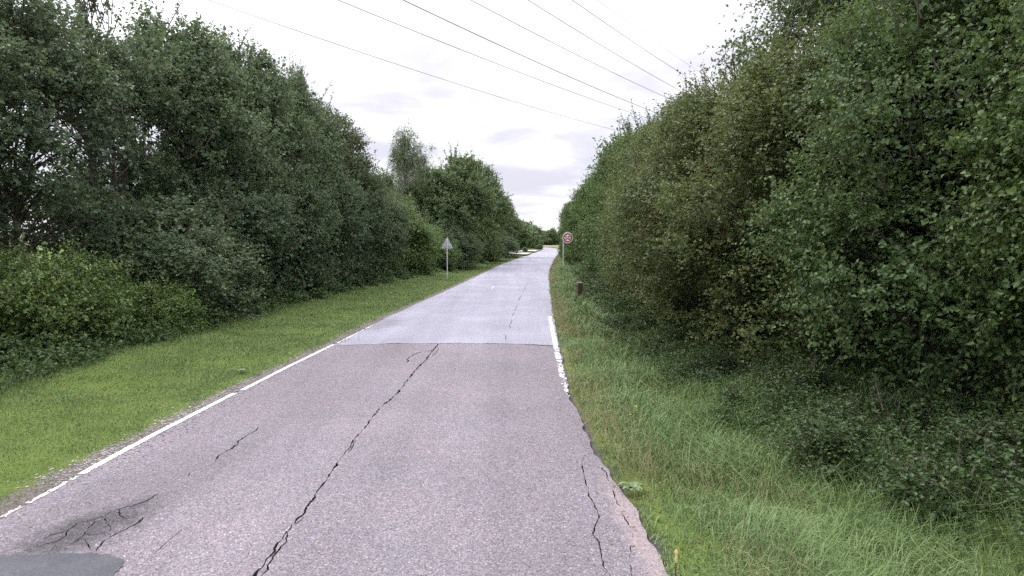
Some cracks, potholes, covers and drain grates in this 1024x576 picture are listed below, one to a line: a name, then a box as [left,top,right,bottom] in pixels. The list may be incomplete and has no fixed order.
crack [43,494,174,552]
crack [581,455,633,576]
crack [253,344,439,576]
